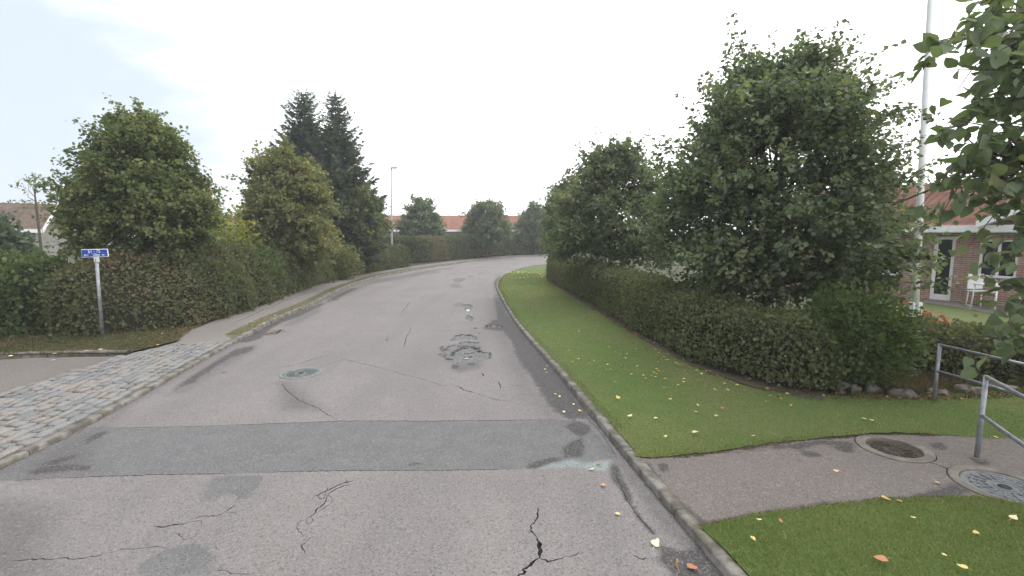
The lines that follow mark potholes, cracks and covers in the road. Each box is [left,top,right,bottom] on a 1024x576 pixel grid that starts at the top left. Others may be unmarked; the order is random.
pothole [443,344,491,364]
crack [296,480,352,552]
crack [332,360,523,402]
manhole cover [947,465,1024,503]
crack [154,497,241,540]
manhole cover [279,367,322,379]
crack [518,509,578,576]
crack [10,546,160,561]
